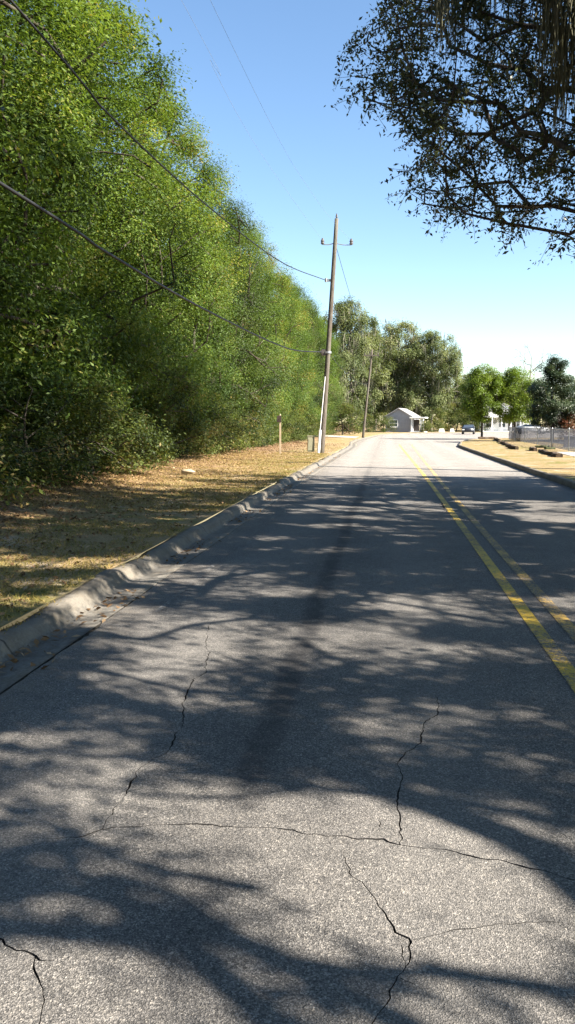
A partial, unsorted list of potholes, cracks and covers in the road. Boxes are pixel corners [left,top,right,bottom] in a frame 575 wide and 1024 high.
crack [27,622,574,1024]
crack [0,938,53,1024]
